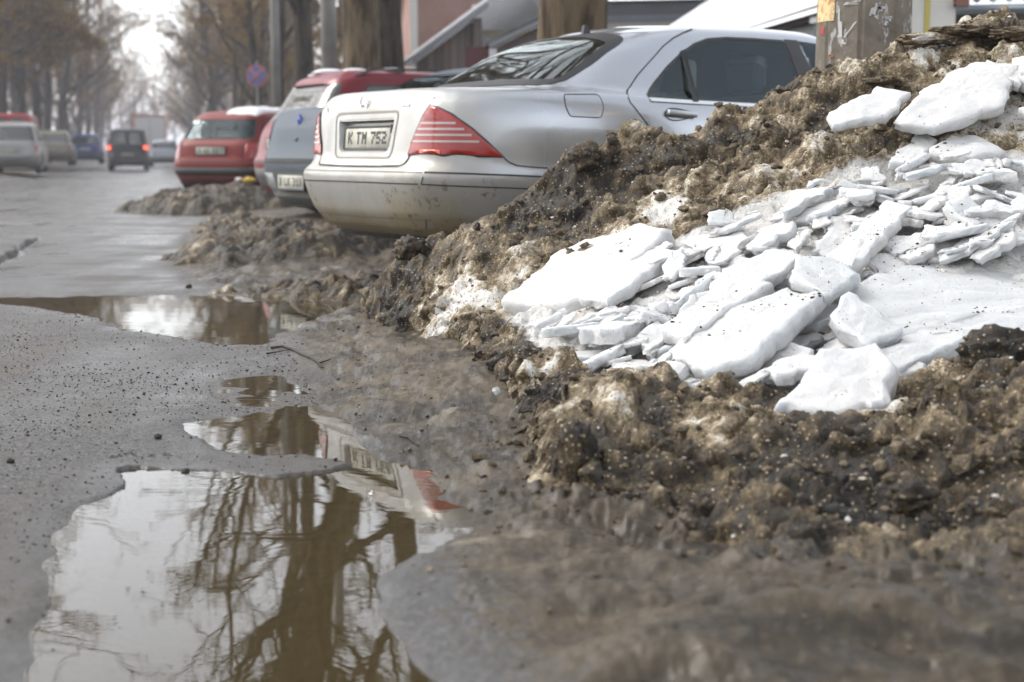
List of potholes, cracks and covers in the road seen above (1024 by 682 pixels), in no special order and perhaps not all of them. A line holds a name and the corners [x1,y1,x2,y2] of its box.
pothole [0,291,351,346]
pothole [2,462,470,682]
crack [0,222,41,277]
pothole [175,403,412,477]
